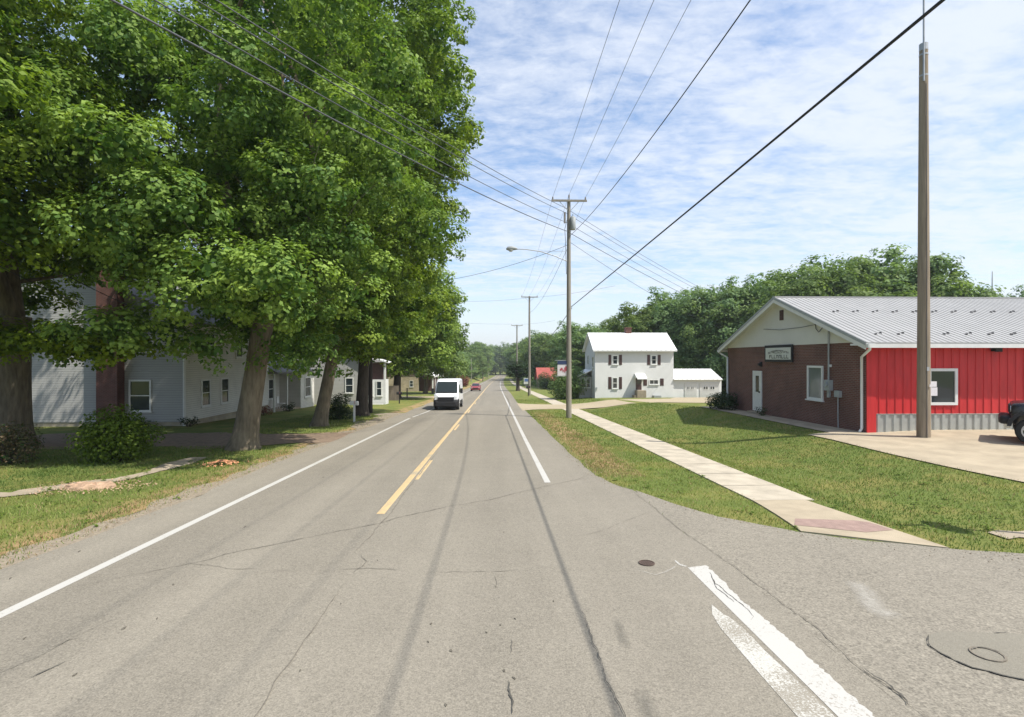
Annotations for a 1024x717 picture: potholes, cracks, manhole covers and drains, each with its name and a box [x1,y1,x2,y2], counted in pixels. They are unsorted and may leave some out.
crack [254,554,397,717]
manhole cover [969,646,1007,662]
